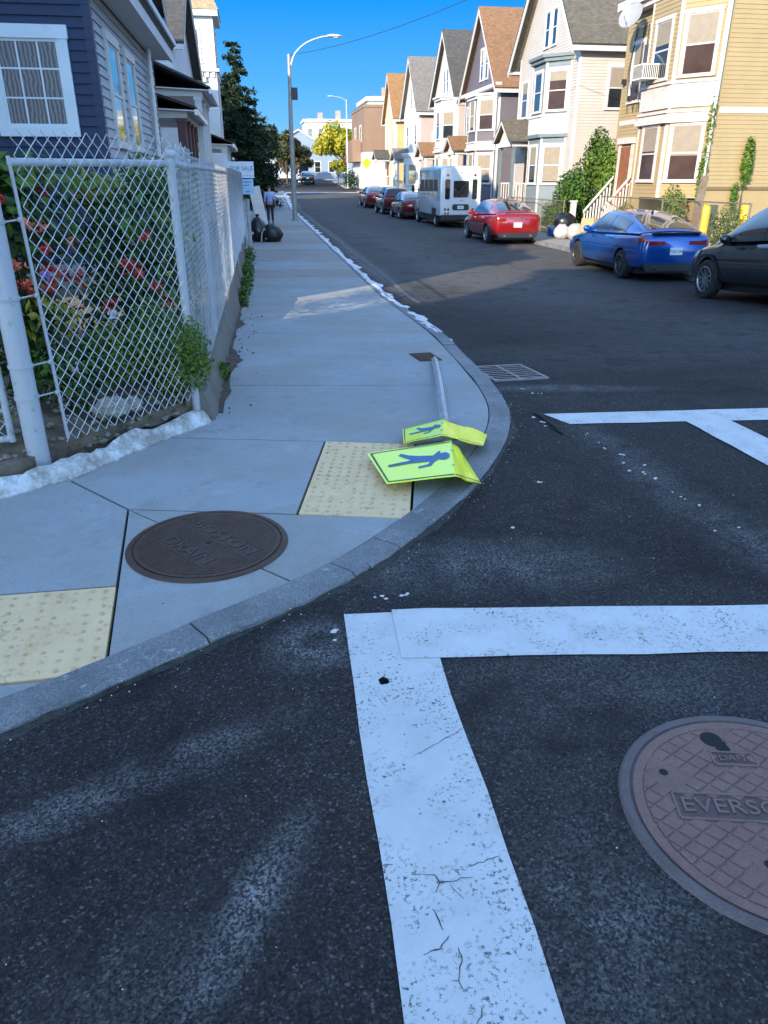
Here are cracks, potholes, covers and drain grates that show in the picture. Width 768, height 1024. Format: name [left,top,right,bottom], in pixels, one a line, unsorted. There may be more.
manhole cover [125,510,288,583]
manhole cover [618,716,768,935]
drain grate [477,364,549,382]
crack [412,856,498,990]
